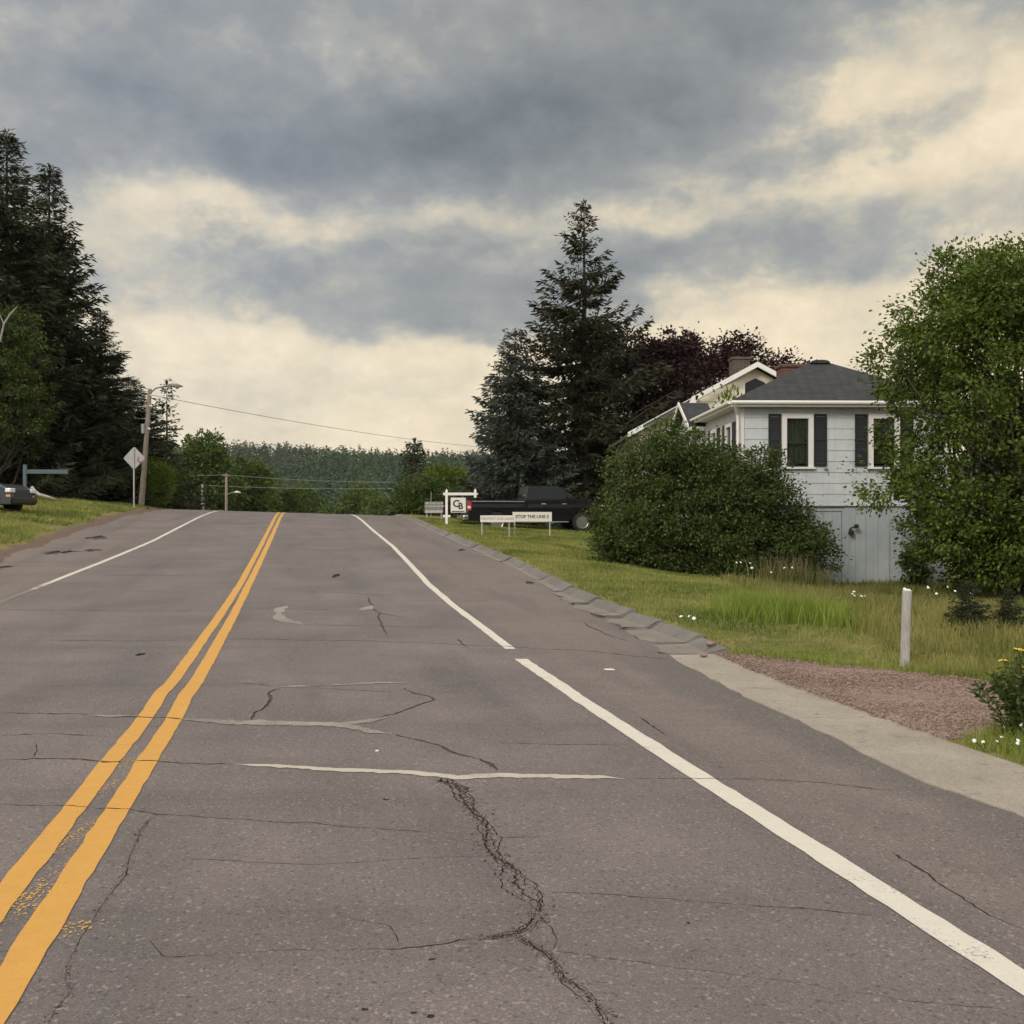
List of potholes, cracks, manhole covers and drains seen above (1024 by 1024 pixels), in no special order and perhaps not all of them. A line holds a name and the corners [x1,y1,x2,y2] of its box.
crack [886,850,1024,930]
crack [273,591,669,660]
crack [0,682,1001,1024]
